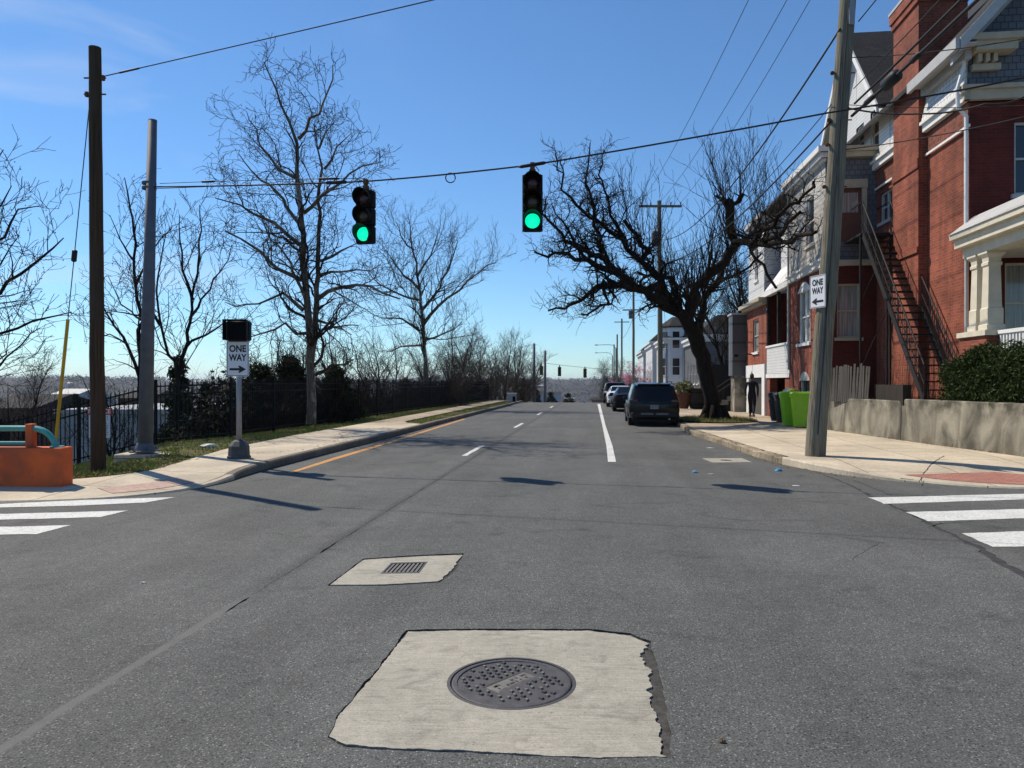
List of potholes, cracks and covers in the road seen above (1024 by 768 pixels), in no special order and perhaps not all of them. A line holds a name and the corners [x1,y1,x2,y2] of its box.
drain grate [381,562,427,574]
manhole cover [447,657,576,710]
